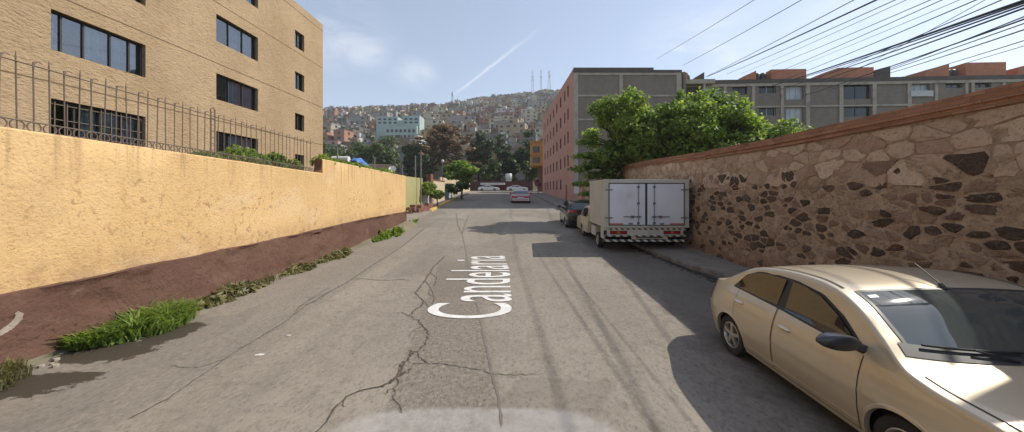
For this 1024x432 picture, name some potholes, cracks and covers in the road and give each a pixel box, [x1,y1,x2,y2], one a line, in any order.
crack [315,213,542,432]
